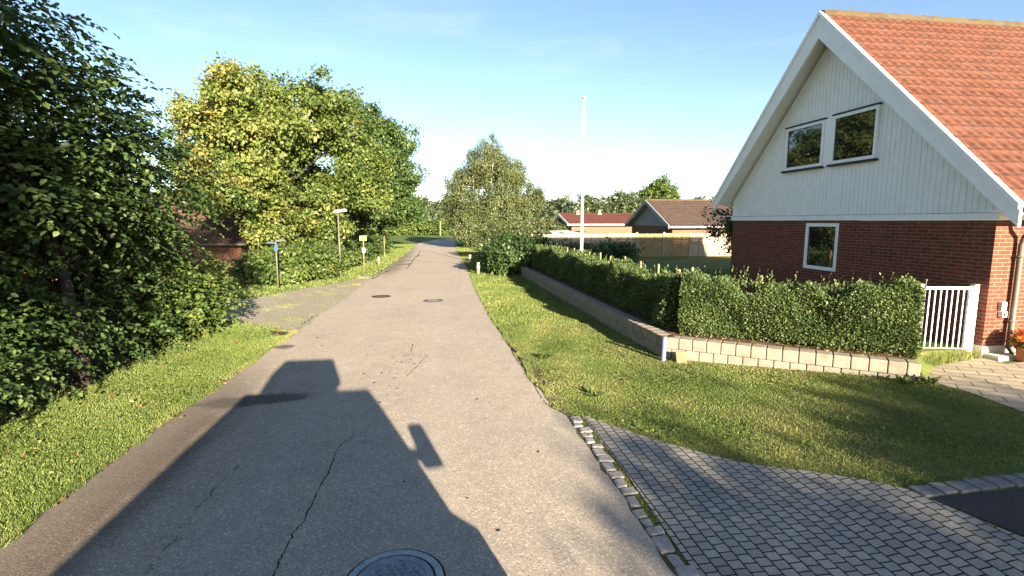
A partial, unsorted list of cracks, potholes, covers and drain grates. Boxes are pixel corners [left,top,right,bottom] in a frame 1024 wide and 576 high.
manhole cover [347,549,446,576]
crack [272,435,353,576]
